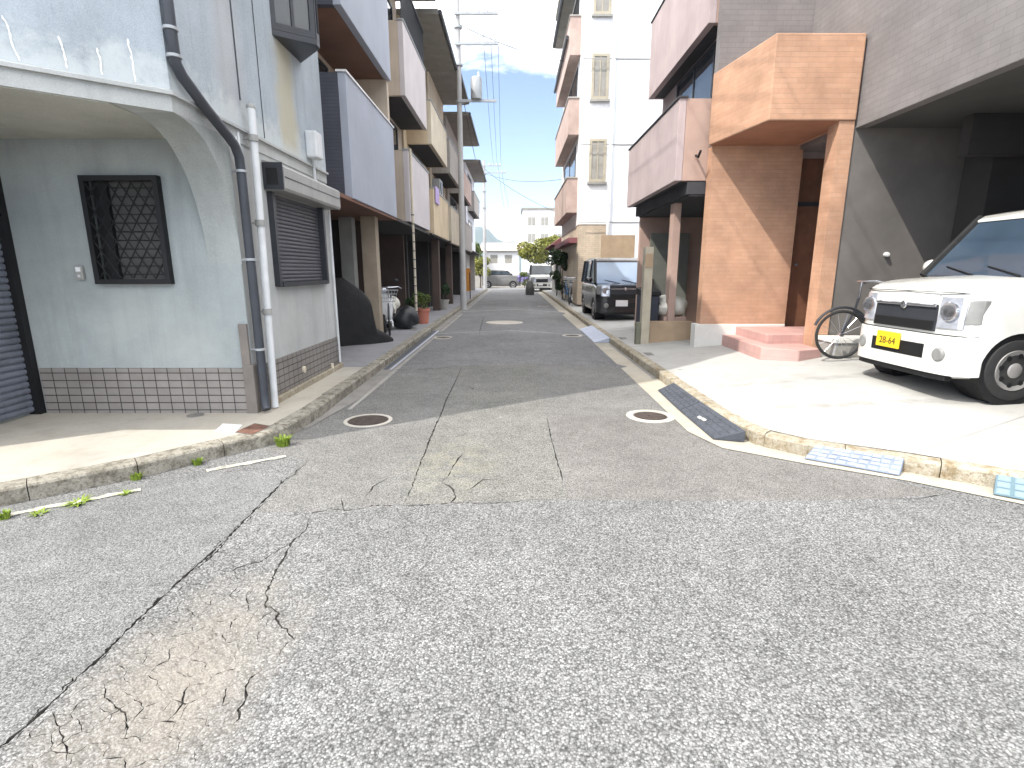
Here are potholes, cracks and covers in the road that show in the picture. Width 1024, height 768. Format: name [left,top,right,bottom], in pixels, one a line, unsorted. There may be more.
manhole cover [626,410,675,423]
manhole cover [343,414,392,428]
crack [1,366,531,768]
crack [547,420,563,486]
